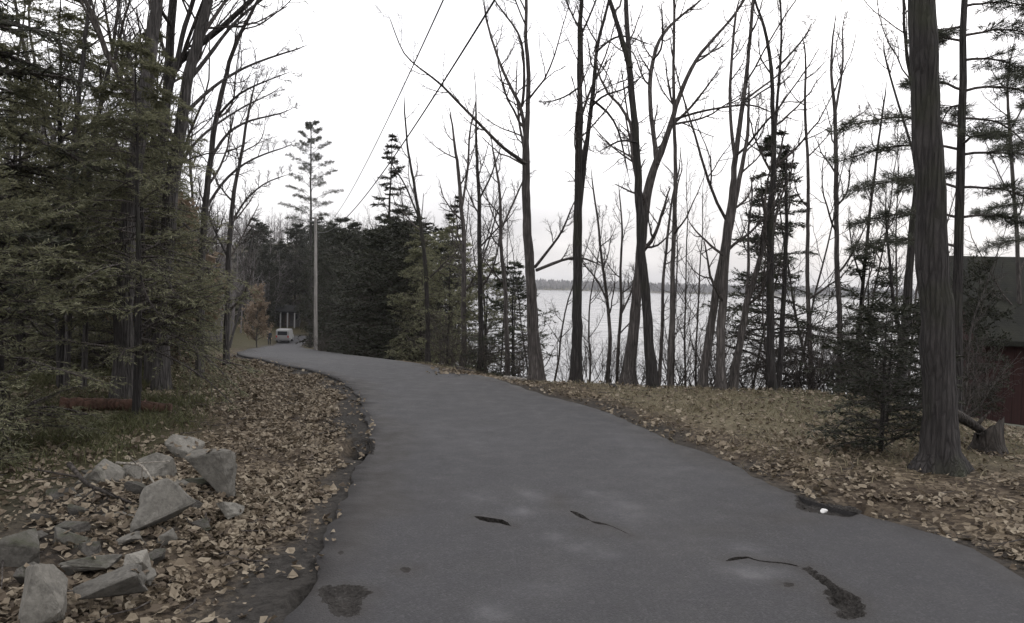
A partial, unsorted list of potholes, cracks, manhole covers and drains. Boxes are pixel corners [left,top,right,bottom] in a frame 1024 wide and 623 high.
crack [726,556,797,566]
pothole [802,566,867,620]
crack [474,516,511,526]
crack [570,511,631,536]
pothole [794,495,863,517]
